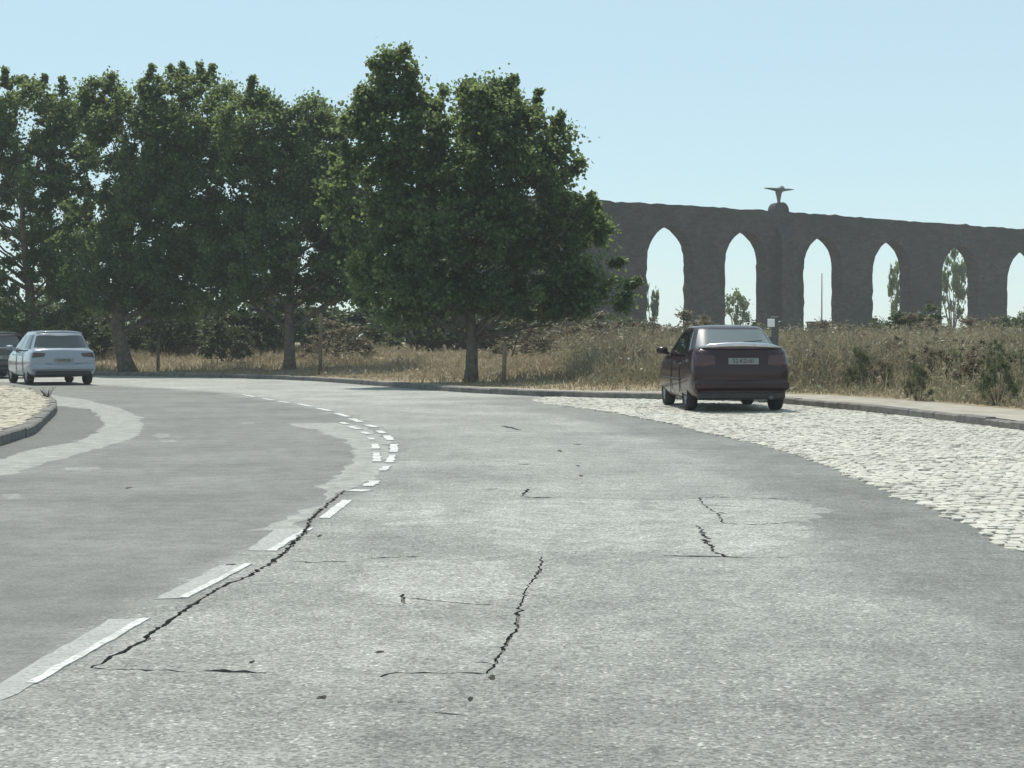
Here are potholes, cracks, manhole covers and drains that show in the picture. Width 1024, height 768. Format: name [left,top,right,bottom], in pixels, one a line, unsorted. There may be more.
crack [380,557,543,677]
crack [90,491,345,673]
crack [653,497,819,558]
